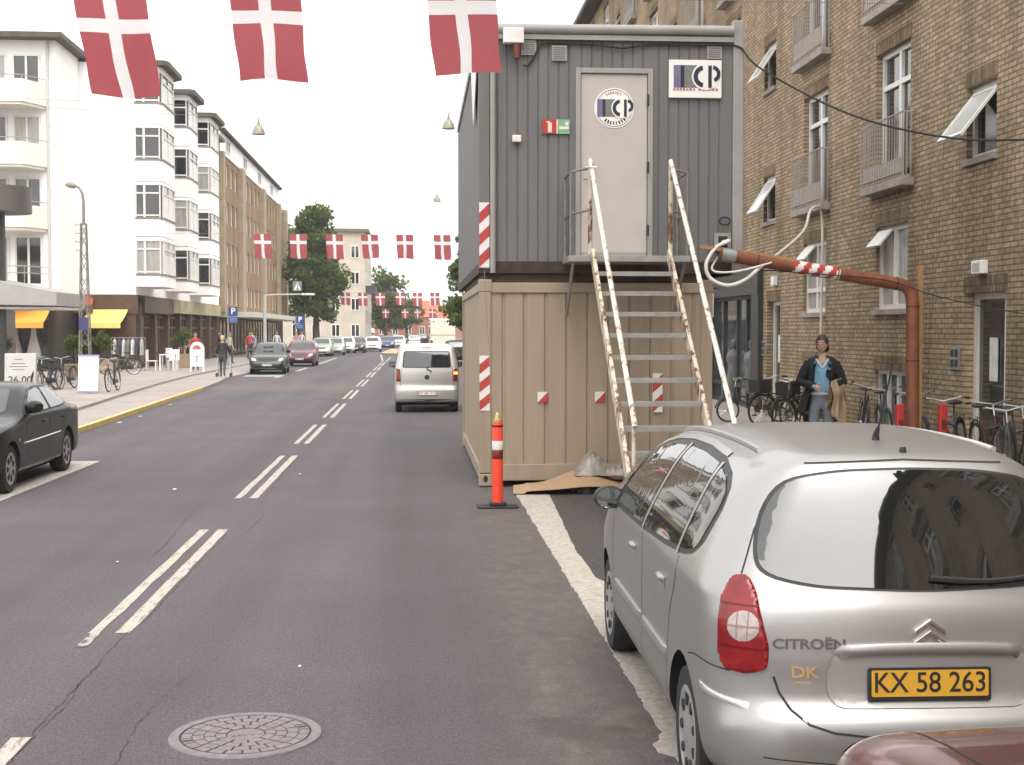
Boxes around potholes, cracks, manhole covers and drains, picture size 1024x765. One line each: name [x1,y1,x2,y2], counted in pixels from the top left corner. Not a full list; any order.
manhole cover [168,712,322,759]
crack [113,679,184,765]
crack [7,633,127,765]
